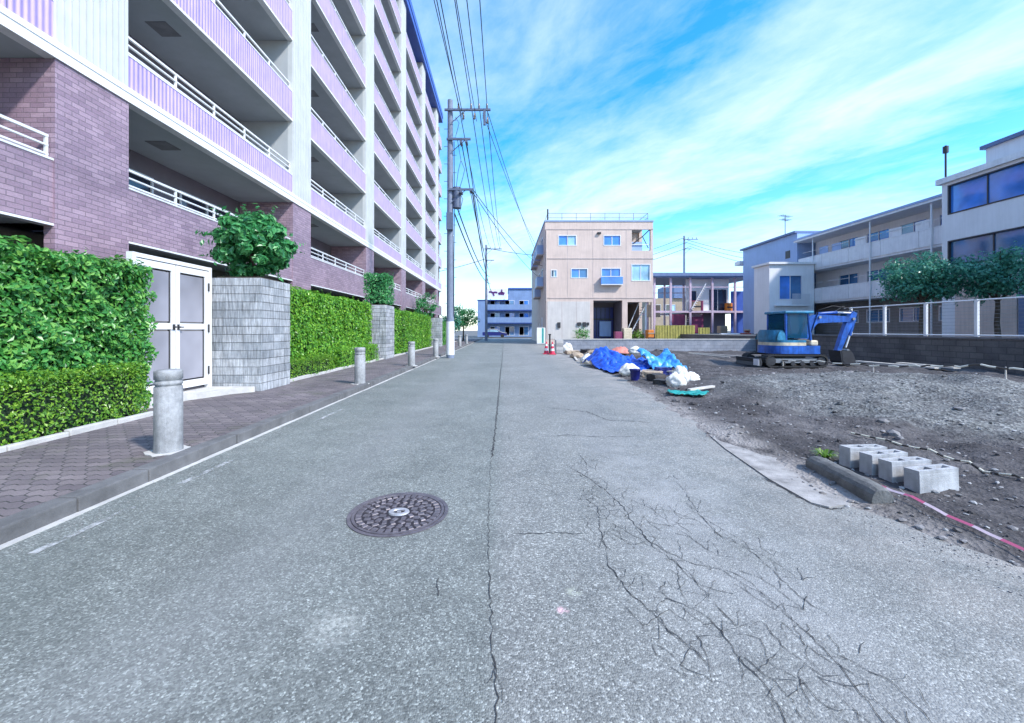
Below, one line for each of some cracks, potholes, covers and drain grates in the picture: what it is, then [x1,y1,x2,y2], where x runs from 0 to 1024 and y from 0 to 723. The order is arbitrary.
manhole cover [346,492,448,537]
crack [568,454,932,723]
